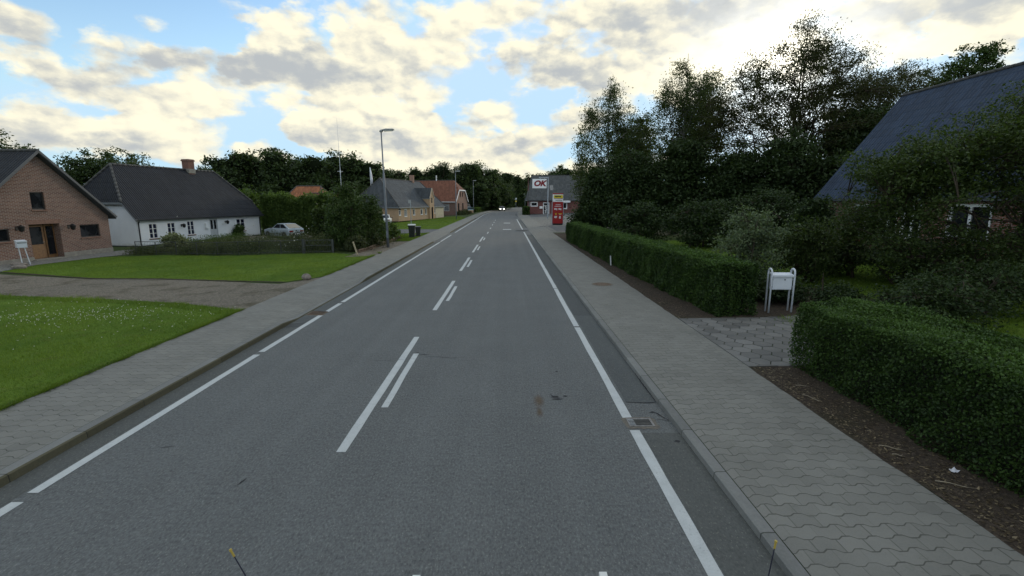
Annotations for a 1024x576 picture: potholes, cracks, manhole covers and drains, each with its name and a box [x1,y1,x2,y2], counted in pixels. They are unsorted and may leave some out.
drain grate [621,417,661,429]
